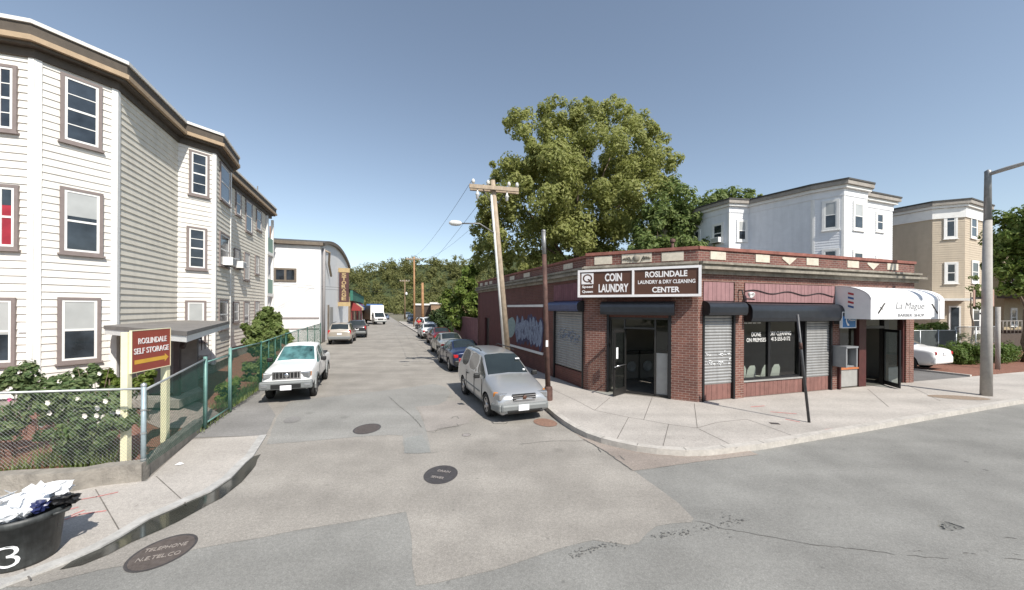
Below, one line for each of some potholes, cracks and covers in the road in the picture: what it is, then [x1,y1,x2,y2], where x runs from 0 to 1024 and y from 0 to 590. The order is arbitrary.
manhole cover [123,534,198,573]
manhole cover [423,465,458,484]
manhole cover [534,418,557,427]
pothole [937,520,964,531]
crack [699,521,895,555]
manhole cover [353,424,381,434]
